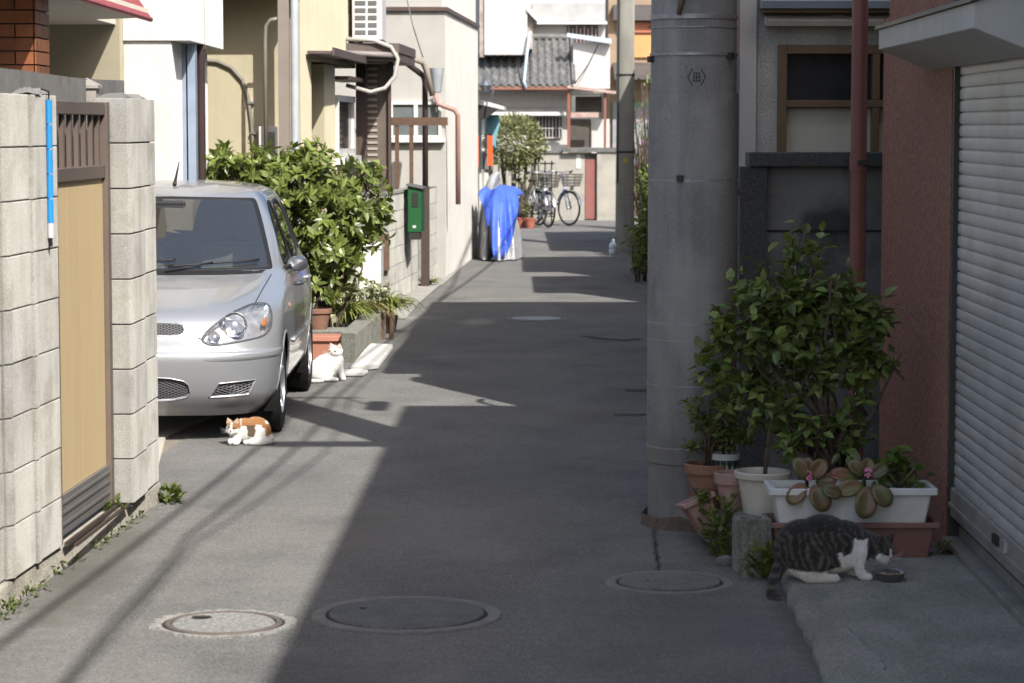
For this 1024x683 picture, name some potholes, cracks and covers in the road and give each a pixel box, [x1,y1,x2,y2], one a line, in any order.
manhole cover [311,596,502,635]
manhole cover [605,570,734,595]
crack [650,527,662,570]
manhole cover [147,609,298,640]
